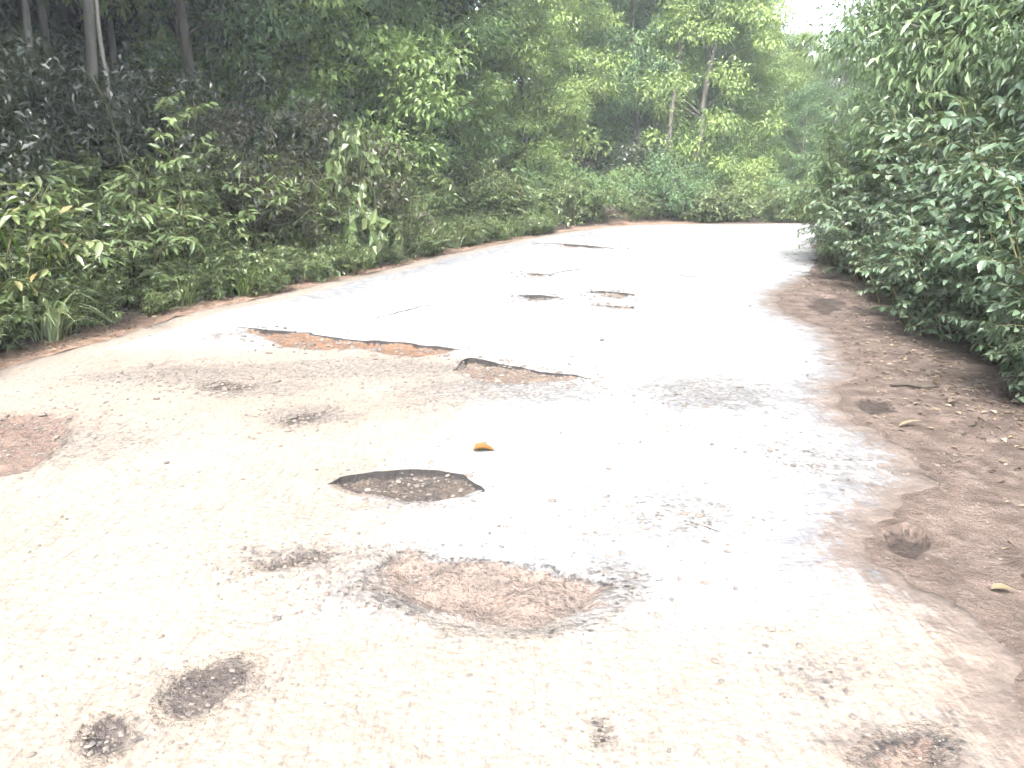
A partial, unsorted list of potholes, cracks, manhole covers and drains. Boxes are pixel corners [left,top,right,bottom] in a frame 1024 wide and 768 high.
pothole [65,705,145,768]
pothole [328,469,485,504]
pothole [271,409,333,429]
pothole [843,719,964,768]
pothole [249,546,338,573]
pothole [589,717,614,754]
pothole [590,291,635,300]
pothole [360,540,631,640]
pothole [236,327,461,358]
pothole [453,358,588,386]
pothole [144,650,269,730]
pothole [0,408,80,477]
